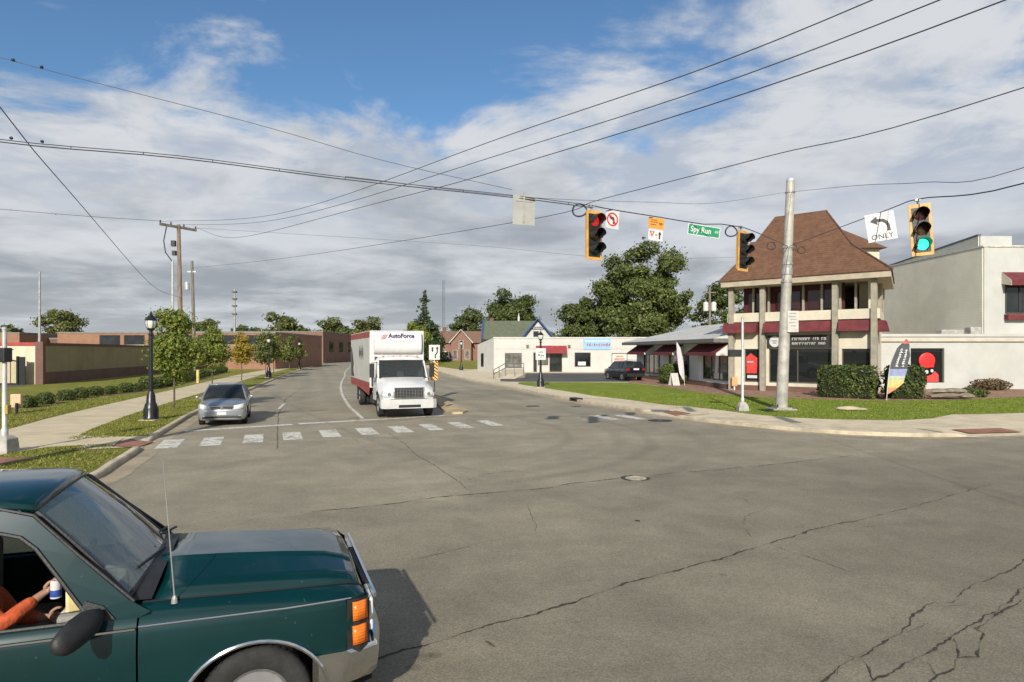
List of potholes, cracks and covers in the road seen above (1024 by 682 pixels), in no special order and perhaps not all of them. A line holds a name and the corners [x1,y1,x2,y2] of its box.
crack [378,484,991,659]
crack [820,559,1024,682]
